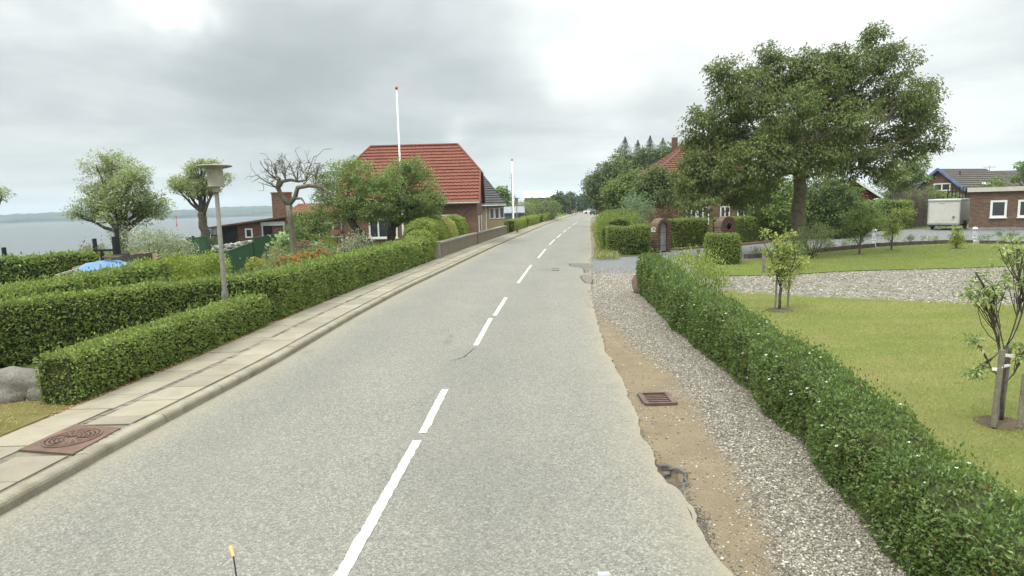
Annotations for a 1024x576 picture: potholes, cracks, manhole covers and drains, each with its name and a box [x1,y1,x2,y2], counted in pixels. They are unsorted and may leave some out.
drain grate [637,392,678,406]
manhole cover [19,424,121,456]
